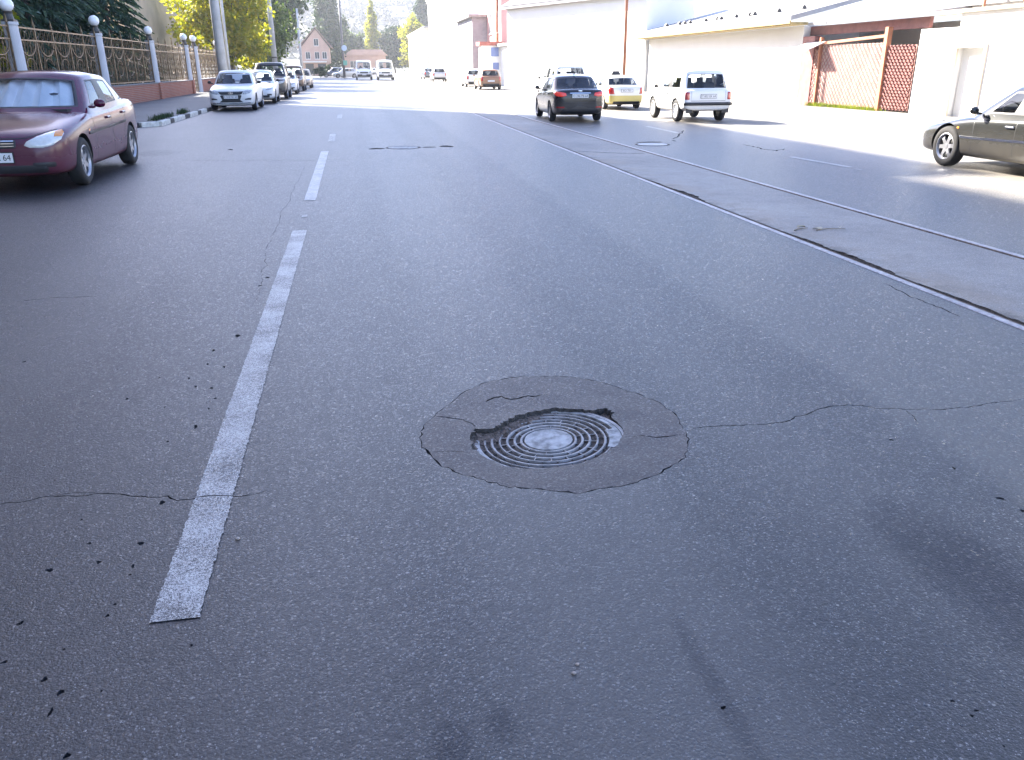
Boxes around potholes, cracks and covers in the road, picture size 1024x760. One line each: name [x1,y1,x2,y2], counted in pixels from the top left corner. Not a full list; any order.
crack [1,491,265,504]
crack [419,376,1020,494]
